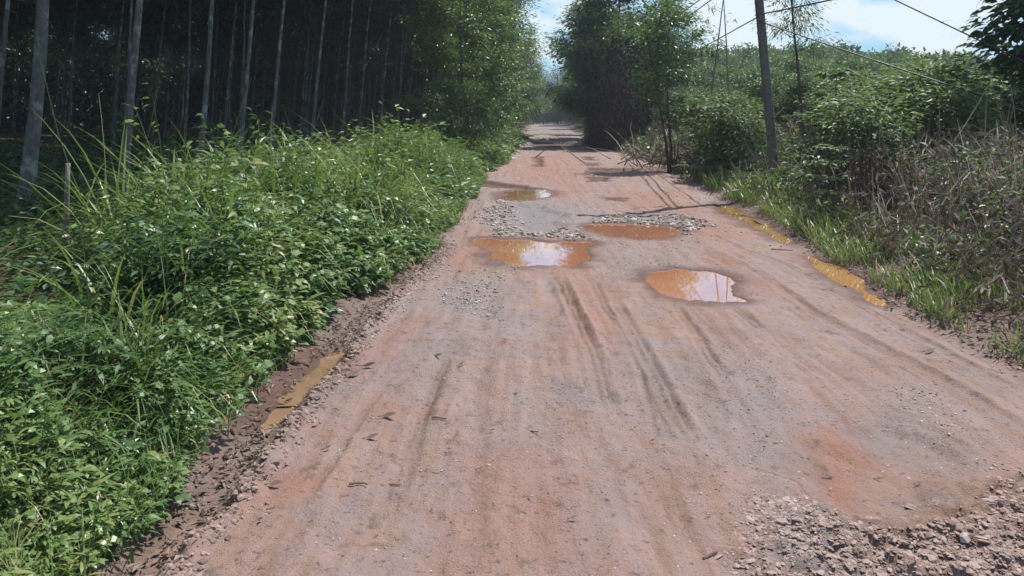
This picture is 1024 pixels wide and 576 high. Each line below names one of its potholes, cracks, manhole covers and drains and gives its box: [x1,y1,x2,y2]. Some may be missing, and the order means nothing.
pothole [266,349,345,407]
pothole [581,222,684,241]
pothole [470,236,598,267]
pothole [641,267,749,303]
pothole [713,203,797,244]
pothole [246,401,302,432]
pothole [803,253,890,307]
pothole [498,189,556,201]
